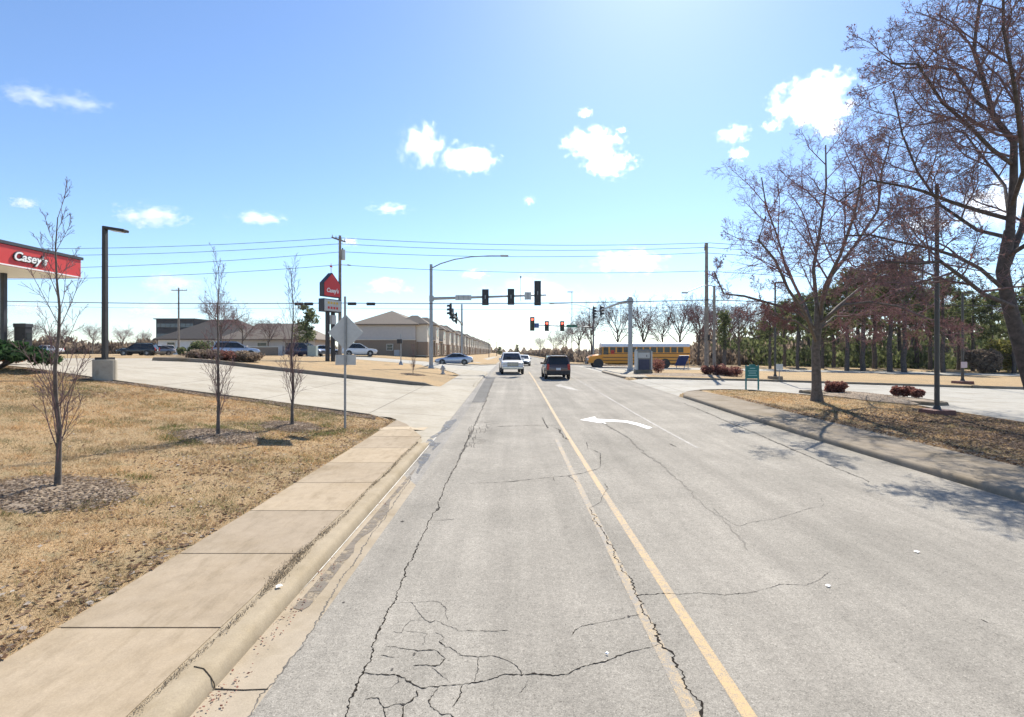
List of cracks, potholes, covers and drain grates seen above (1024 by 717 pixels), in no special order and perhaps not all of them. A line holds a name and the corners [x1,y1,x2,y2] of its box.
crack [362,445,829,717]
crack [459,382,498,458]
